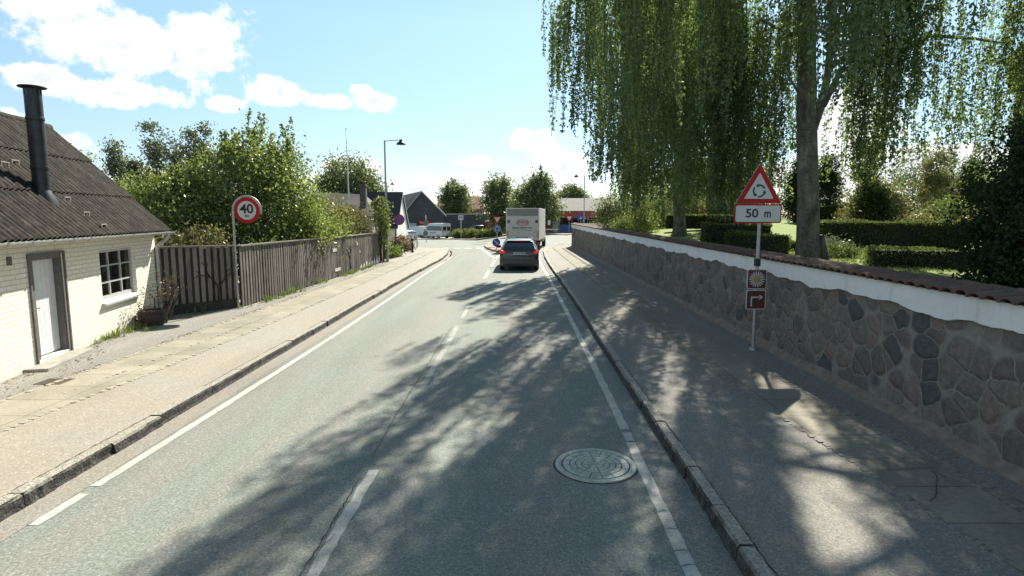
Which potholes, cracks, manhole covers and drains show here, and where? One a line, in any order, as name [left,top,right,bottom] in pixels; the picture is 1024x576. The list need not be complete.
manhole cover [553,448,638,484]
crack [882,467,984,557]
